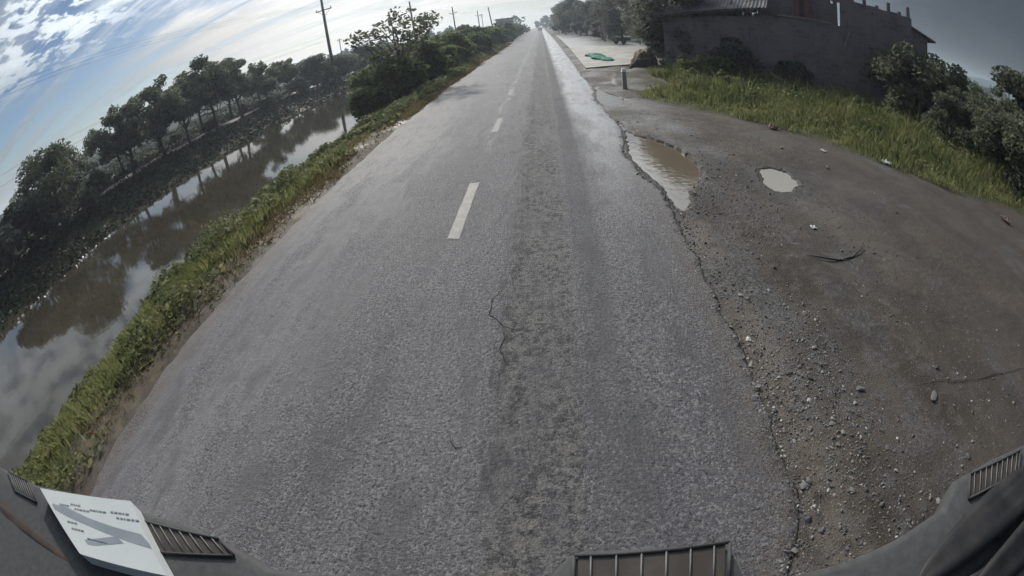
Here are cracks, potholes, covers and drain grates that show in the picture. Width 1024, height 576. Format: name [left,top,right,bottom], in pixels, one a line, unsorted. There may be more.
pothole [617,122,703,213]
crack [482,292,526,362]
pothole [757,167,804,193]
